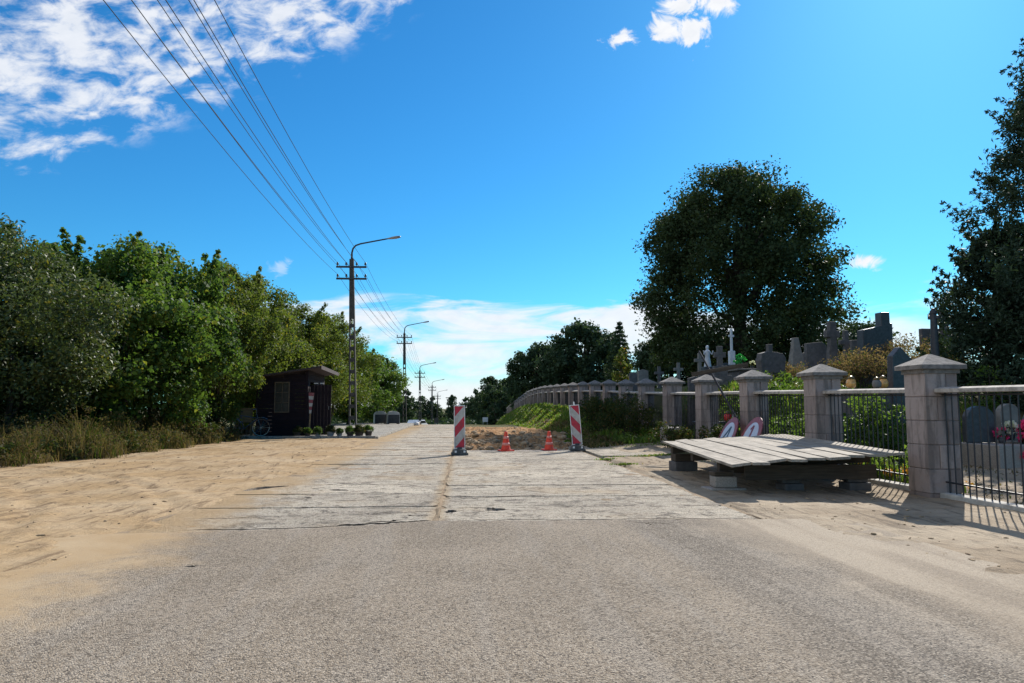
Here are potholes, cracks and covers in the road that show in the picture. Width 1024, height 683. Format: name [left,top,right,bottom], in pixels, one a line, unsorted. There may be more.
crack [205,511,432,530]
